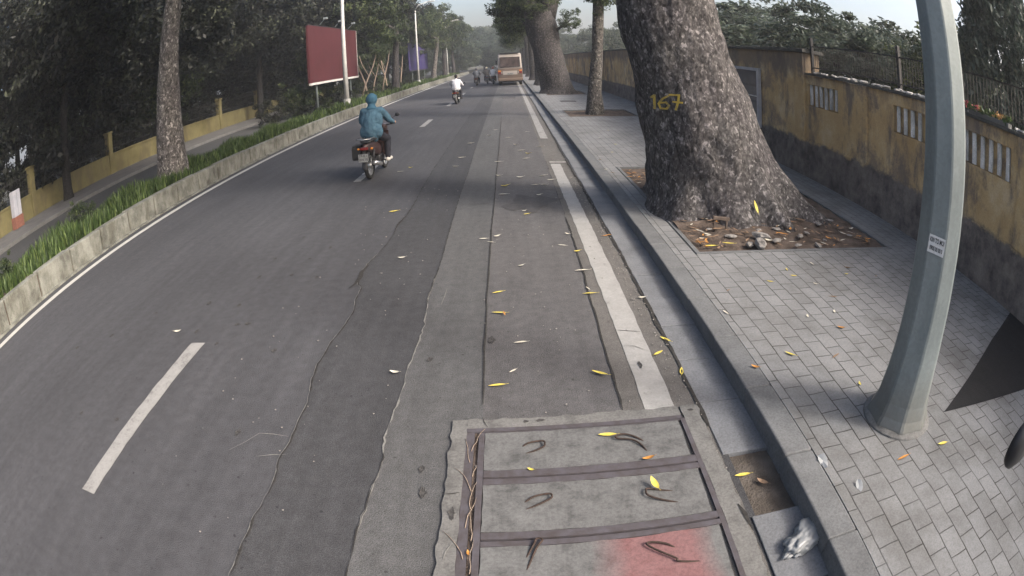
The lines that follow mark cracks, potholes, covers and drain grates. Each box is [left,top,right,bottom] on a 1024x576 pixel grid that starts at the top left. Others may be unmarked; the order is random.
crack [228,116,470,575]
crack [345,116,502,576]
